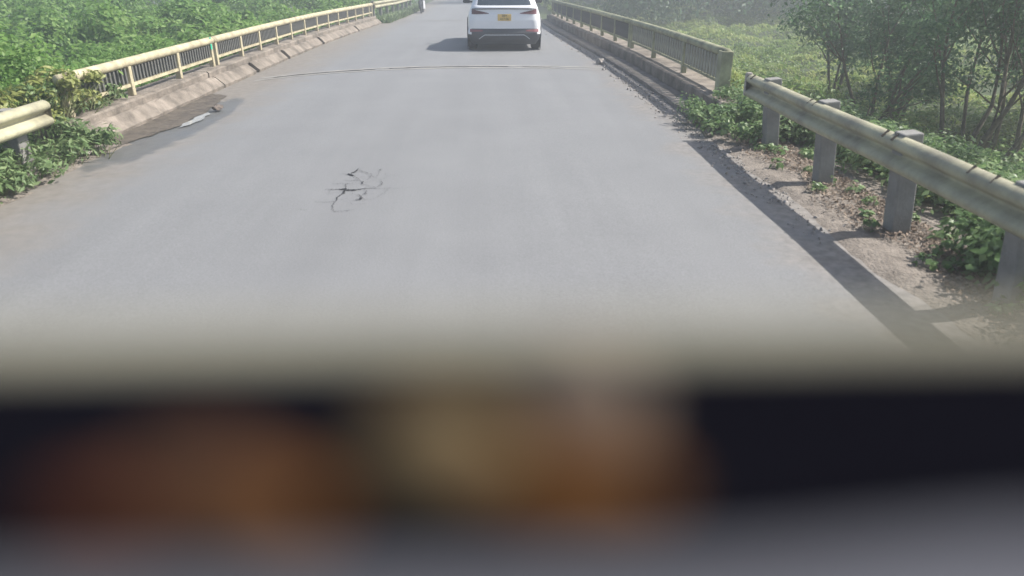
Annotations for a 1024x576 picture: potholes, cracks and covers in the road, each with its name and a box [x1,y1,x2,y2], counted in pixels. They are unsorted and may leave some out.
crack [303,169,395,212]
